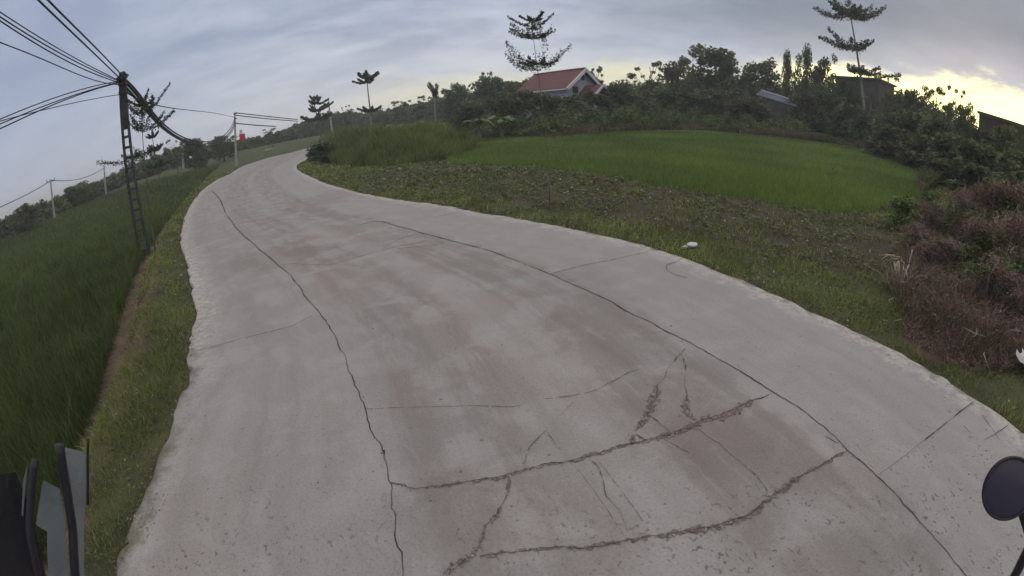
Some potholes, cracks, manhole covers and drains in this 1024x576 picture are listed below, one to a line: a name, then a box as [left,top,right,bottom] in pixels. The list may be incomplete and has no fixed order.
crack [212,191,967,576]
